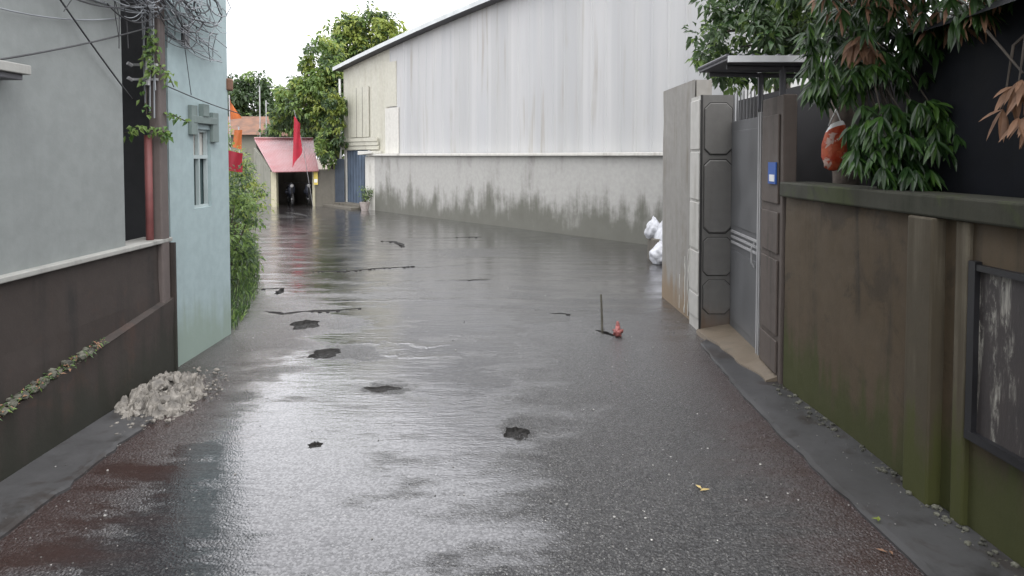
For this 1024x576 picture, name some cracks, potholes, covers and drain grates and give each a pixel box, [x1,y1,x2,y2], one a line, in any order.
pothole [364,385,401,393]
crack [261,288,361,315]
pothole [290,320,320,330]
pothole [307,348,341,359]
pothole [503,425,531,441]
